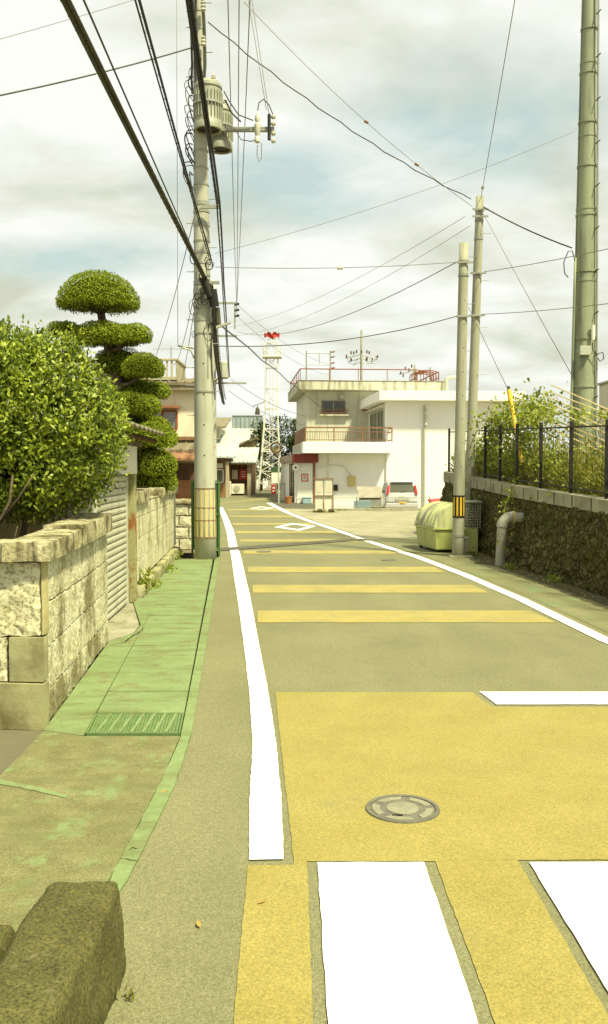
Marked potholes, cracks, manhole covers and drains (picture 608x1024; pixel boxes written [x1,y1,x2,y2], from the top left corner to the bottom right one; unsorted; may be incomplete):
manhole cover [366,794,440,824]
drain grate [86,713,184,737]
